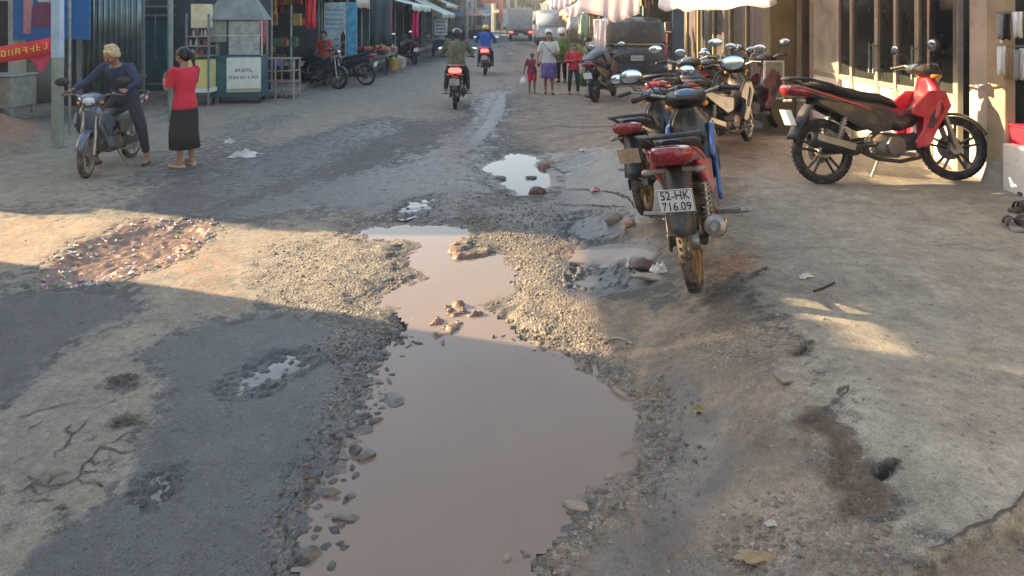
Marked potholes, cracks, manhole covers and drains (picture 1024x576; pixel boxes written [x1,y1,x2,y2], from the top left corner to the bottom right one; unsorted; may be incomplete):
pothole [560,241,665,269]
pothole [271,339,683,576]
crack [10,404,141,511]
crack [928,491,1024,549]
pothole [127,466,185,508]
pothole [467,150,566,199]
pothole [556,207,637,245]
pothole [94,372,146,396]
pothole [105,412,148,431]
pothole [387,193,443,223]
pothole [211,345,326,403]
pothole [341,217,537,344]
